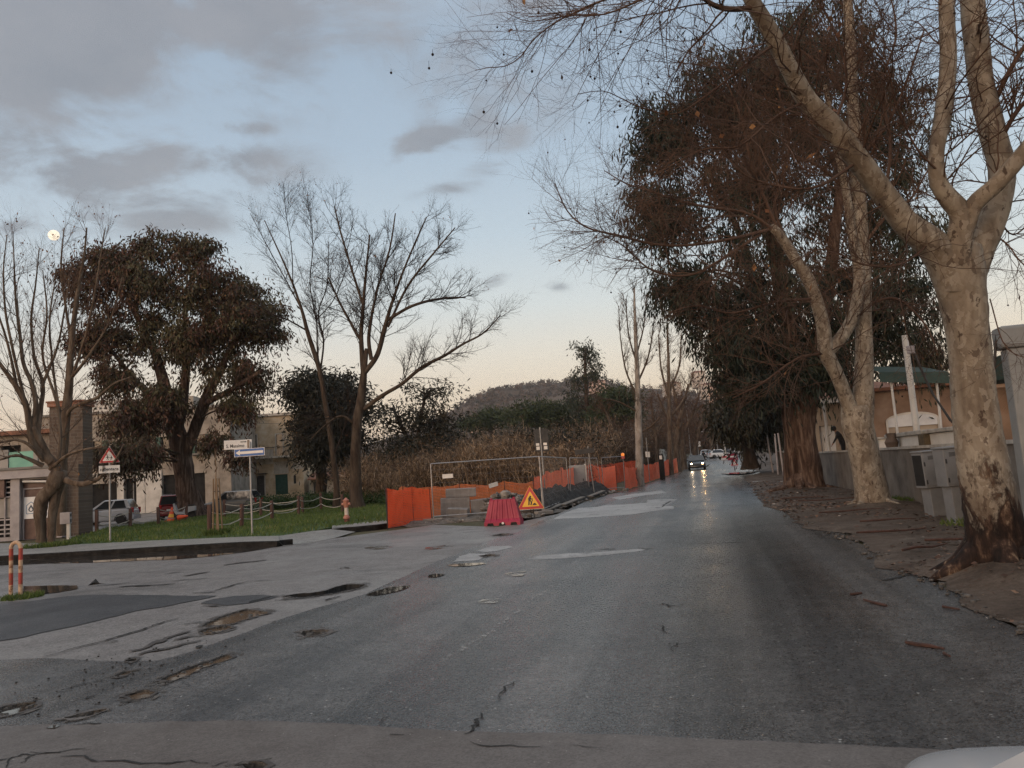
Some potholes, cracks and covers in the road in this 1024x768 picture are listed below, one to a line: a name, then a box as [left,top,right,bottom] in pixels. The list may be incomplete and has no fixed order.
pothole [53,707,111,722]
crack [0,748,222,767]
pothole [0,698,43,718]
pothole [282,583,368,599]
crack [42,560,308,657]
pothole [295,627,337,640]
pothole [198,608,275,628]
pothole [116,686,165,705]
pothole [188,624,237,637]
crack [465,680,540,747]
pothole [145,652,244,686]
